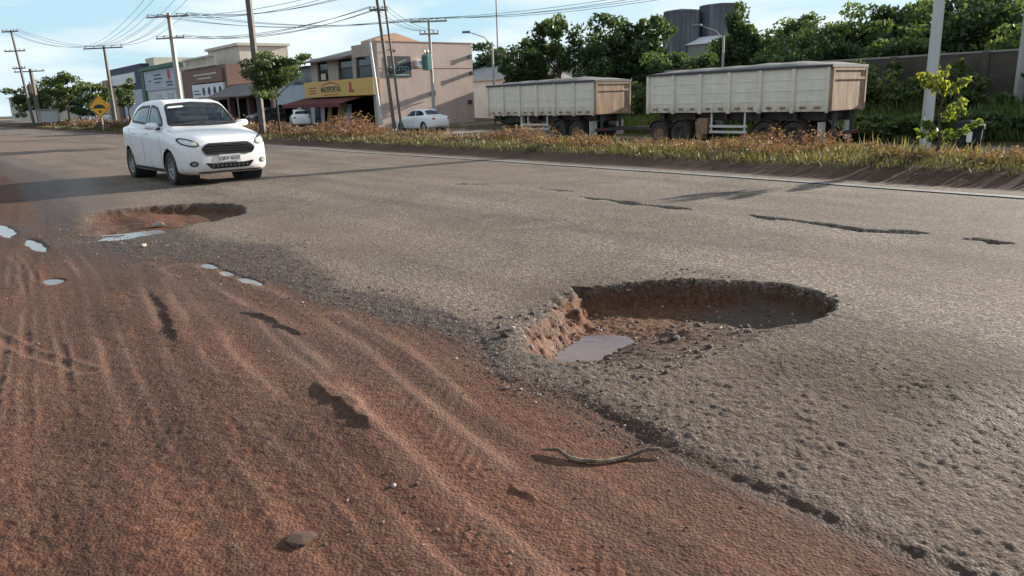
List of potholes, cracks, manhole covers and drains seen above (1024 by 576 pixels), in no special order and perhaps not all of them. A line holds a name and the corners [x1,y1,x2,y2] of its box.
pothole [72,203,246,242]
crack [752,216,921,235]
crack [586,198,685,210]
pothole [510,279,839,368]
